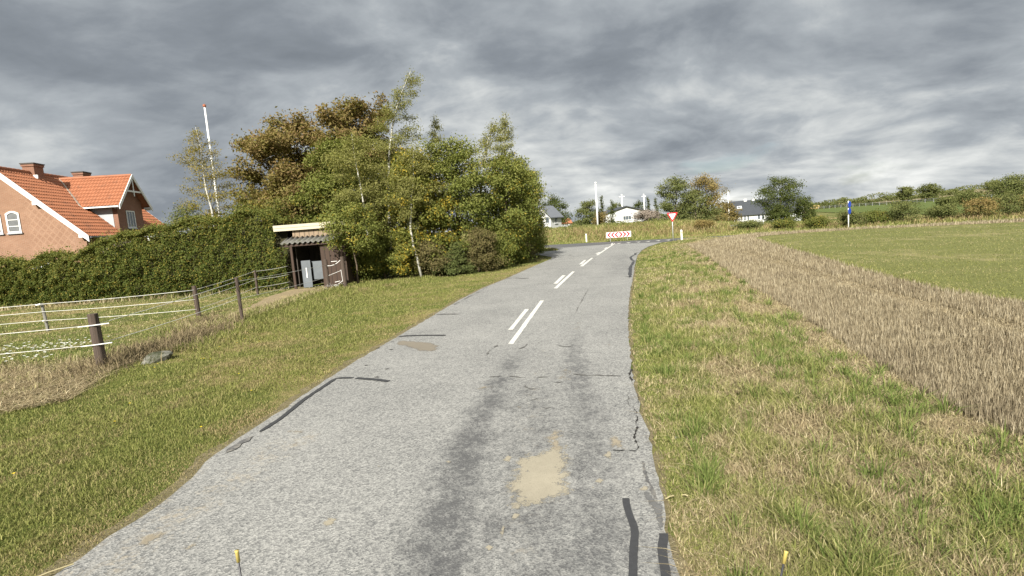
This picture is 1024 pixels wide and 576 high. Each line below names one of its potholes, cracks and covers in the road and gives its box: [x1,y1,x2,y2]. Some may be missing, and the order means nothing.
crack [489,369,658,499]
